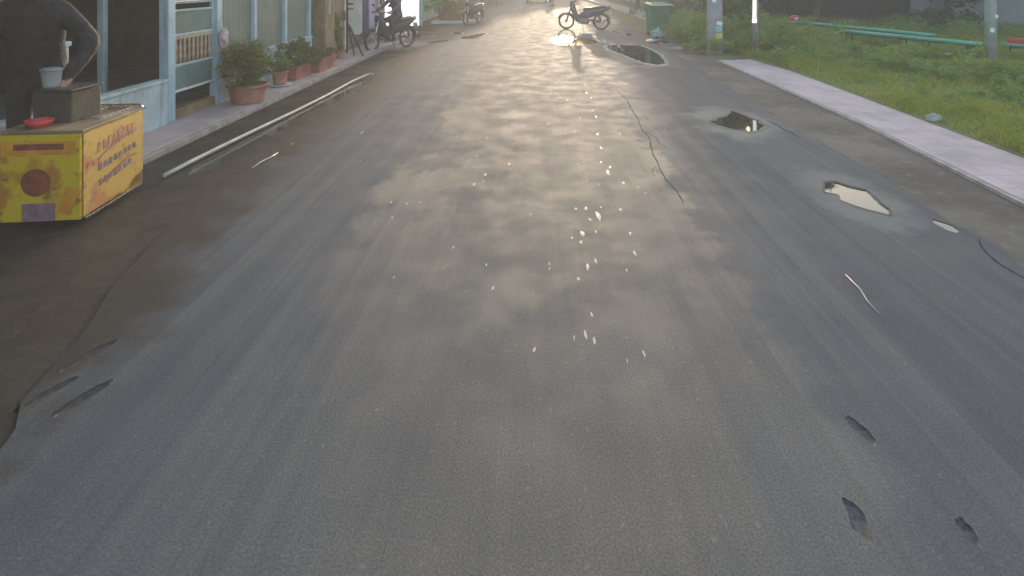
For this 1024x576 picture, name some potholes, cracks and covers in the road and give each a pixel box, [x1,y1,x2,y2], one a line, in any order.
pothole [821,181,892,216]
crack [618,91,684,204]
pothole [603,44,669,67]
pothole [932,219,960,233]
pothole [50,378,114,418]
pothole [60,340,117,372]
pothole [23,376,79,407]
pothole [842,497,872,544]
crack [979,239,1024,278]
pothole [955,517,981,547]
pothole [845,415,876,446]
pothole [703,109,770,134]
